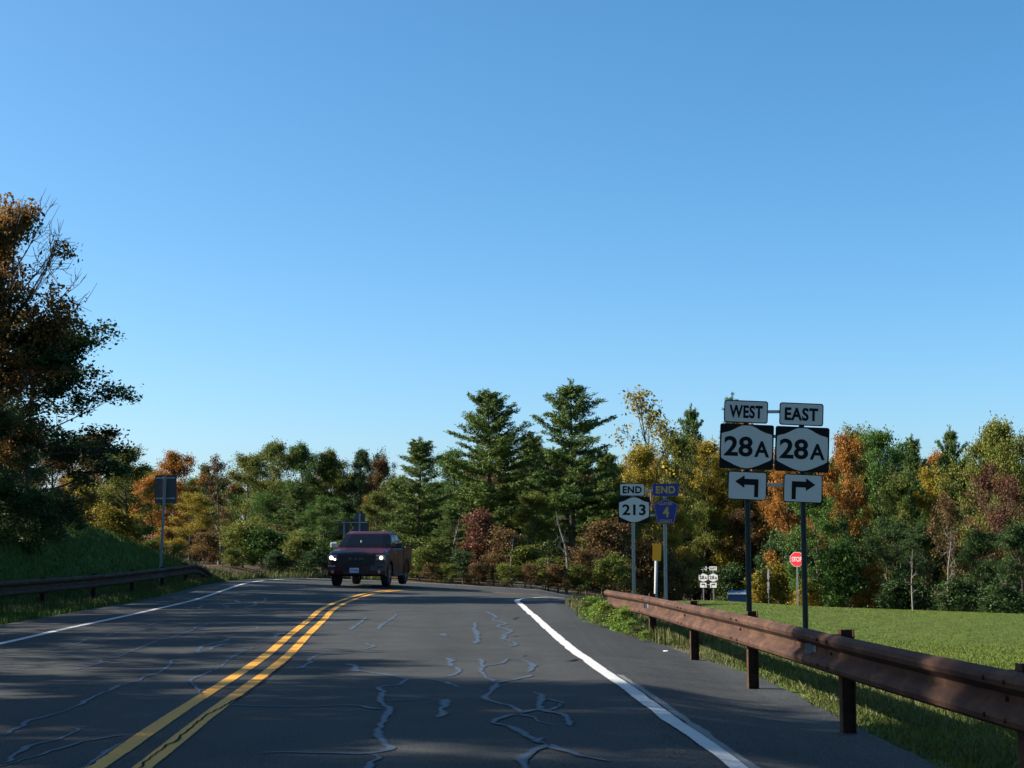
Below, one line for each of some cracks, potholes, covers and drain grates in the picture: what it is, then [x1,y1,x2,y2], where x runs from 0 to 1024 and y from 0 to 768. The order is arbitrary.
crack [139,659,291,768]
